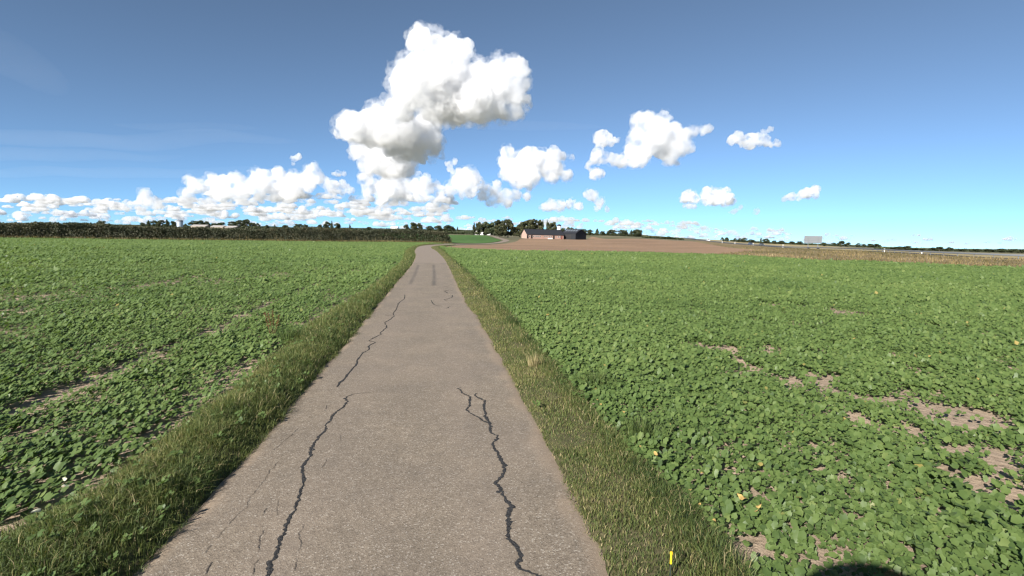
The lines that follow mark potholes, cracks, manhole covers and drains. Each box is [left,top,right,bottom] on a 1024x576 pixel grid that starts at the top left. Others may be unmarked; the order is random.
crack [205,467,279,574]
